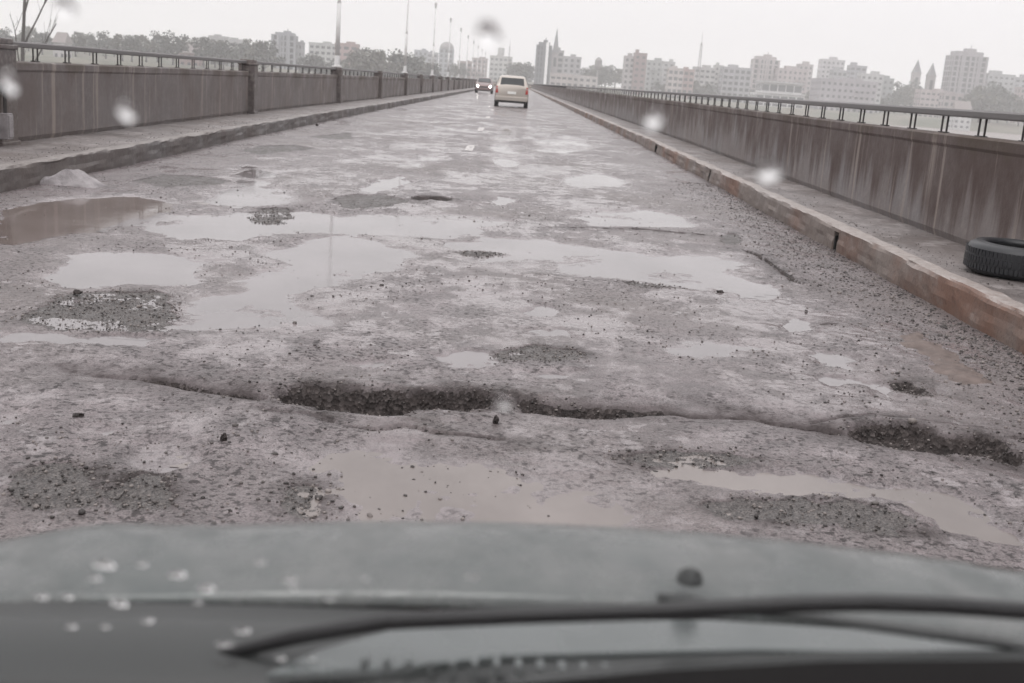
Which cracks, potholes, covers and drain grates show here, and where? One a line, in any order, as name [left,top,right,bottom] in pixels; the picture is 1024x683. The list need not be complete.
pothole [831,424,1024,467]
pothole [699,497,917,536]
pothole [619,450,761,470]
pothole [889,382,927,395]
pothole [720,234,742,245]
pothole [336,194,408,209]
pothole [21,291,178,332]
pothole [8,462,124,510]
pothole [493,345,584,361]
pothole [519,399,667,420]
pothole [251,208,294,224]
pothole [96,473,176,510]
